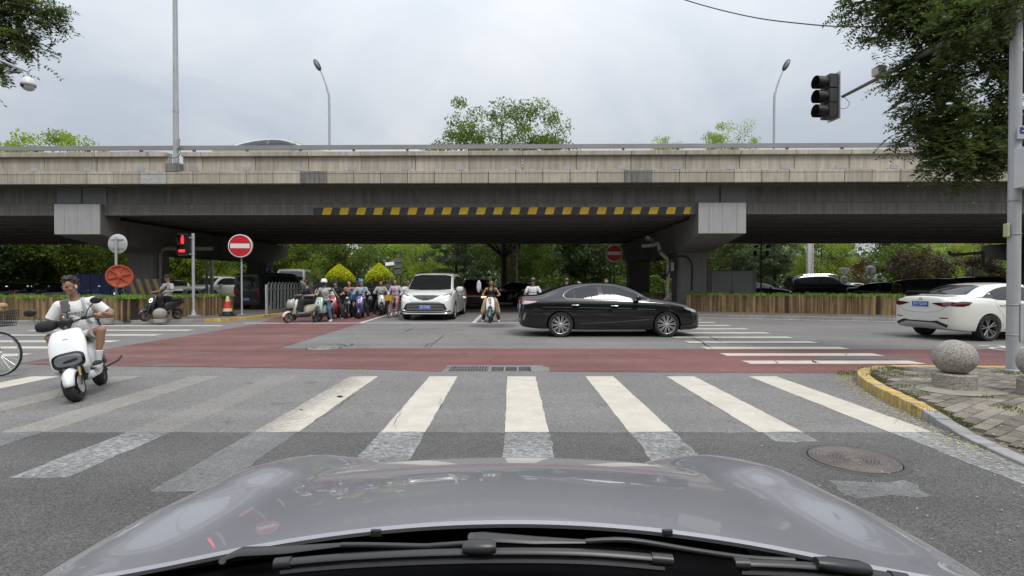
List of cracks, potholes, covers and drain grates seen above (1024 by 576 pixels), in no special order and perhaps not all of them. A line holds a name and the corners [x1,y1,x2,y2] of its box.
manhole cover [800,444,912,477]
